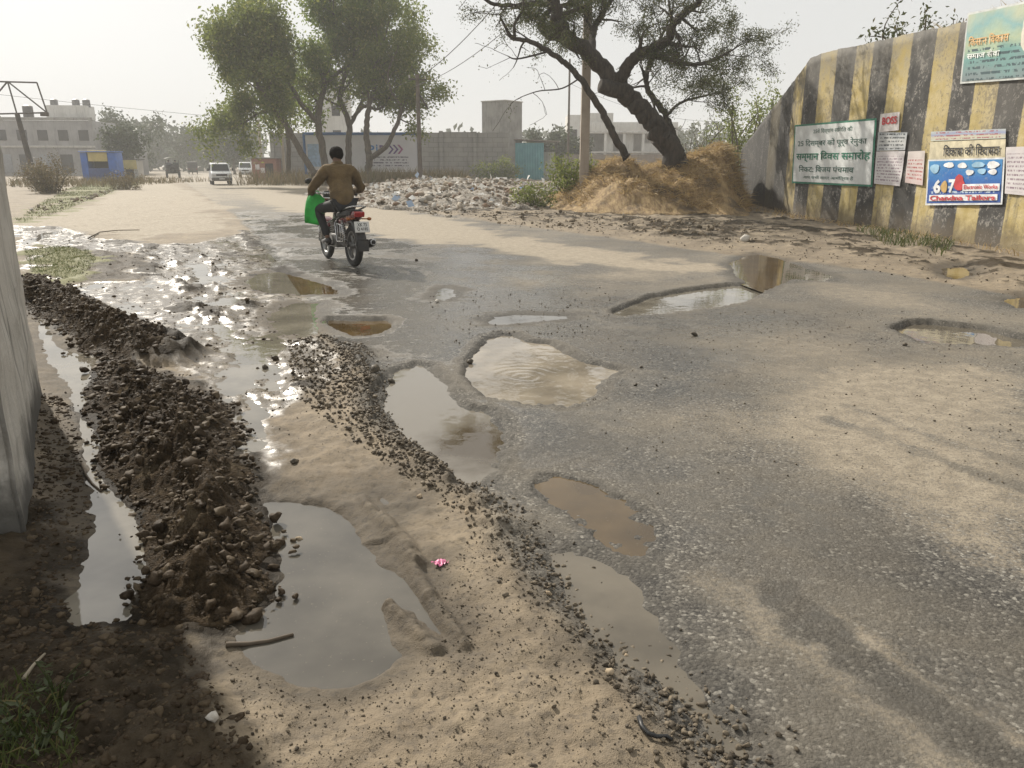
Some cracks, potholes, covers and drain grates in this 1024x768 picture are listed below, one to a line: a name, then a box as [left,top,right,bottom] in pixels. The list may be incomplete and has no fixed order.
pothole [457,331,629,409]
pothole [885,318,1024,348]
pothole [525,471,668,564]
pothole [318,315,399,337]
pothole [361,360,515,488]
pothole [607,282,770,317]
